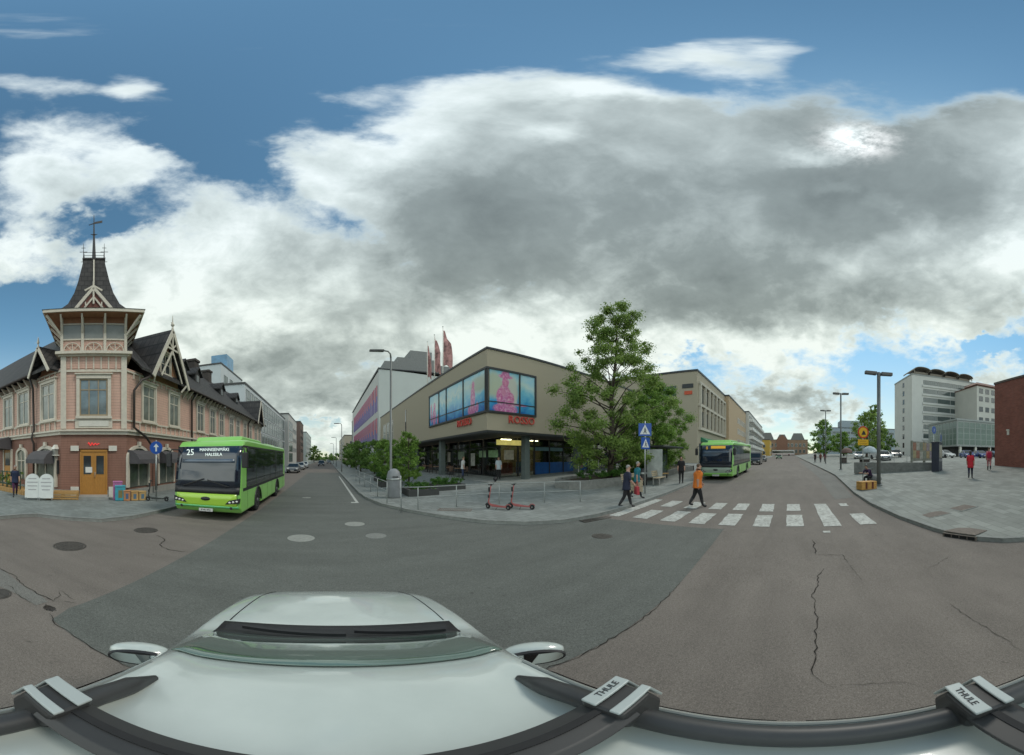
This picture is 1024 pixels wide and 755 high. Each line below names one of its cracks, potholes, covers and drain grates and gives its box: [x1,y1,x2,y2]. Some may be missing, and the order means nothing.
crack [811,570,914,687]
manhole cover [53,541,86,551]
drain grate [943,528,987,541]
crack [1,569,74,603]
